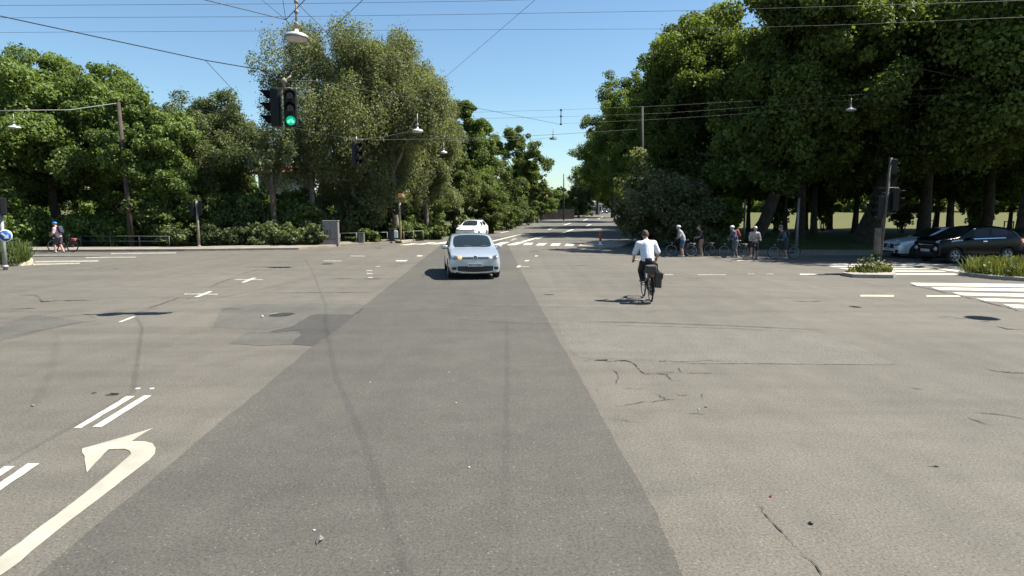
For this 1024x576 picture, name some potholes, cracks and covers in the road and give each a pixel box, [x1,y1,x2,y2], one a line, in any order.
crack [754,500,823,575]
crack [585,359,720,423]
